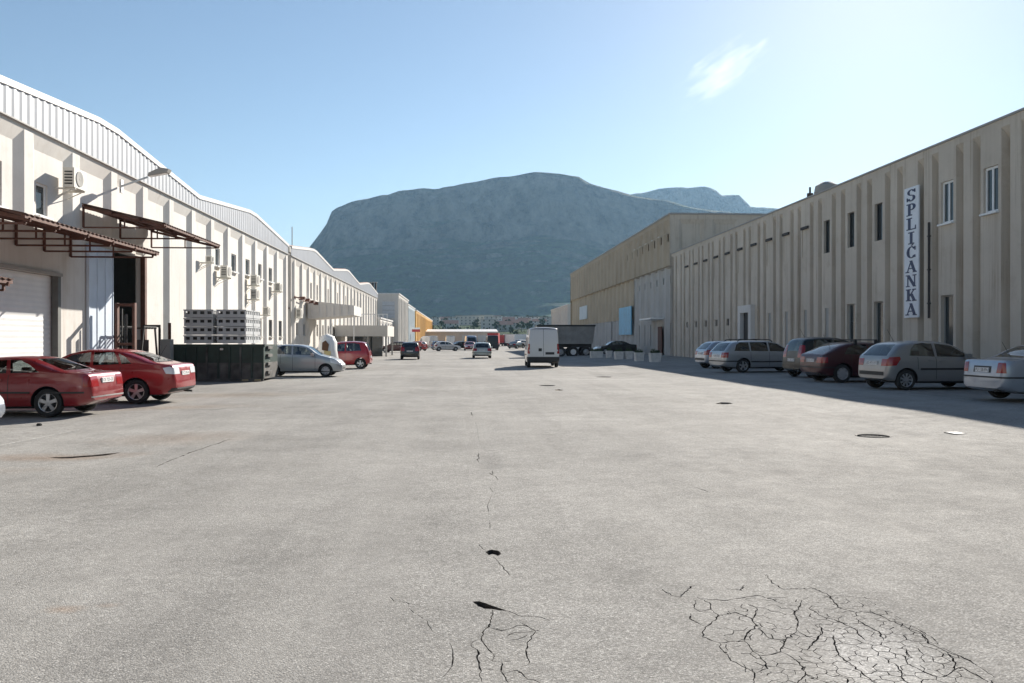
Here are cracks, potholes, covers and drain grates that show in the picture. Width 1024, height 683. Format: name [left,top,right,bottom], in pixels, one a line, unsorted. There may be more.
pothole [473,601,507,611]
crack [662,575,998,683]
crack [390,597,454,678]
crack [471,610,548,682]
